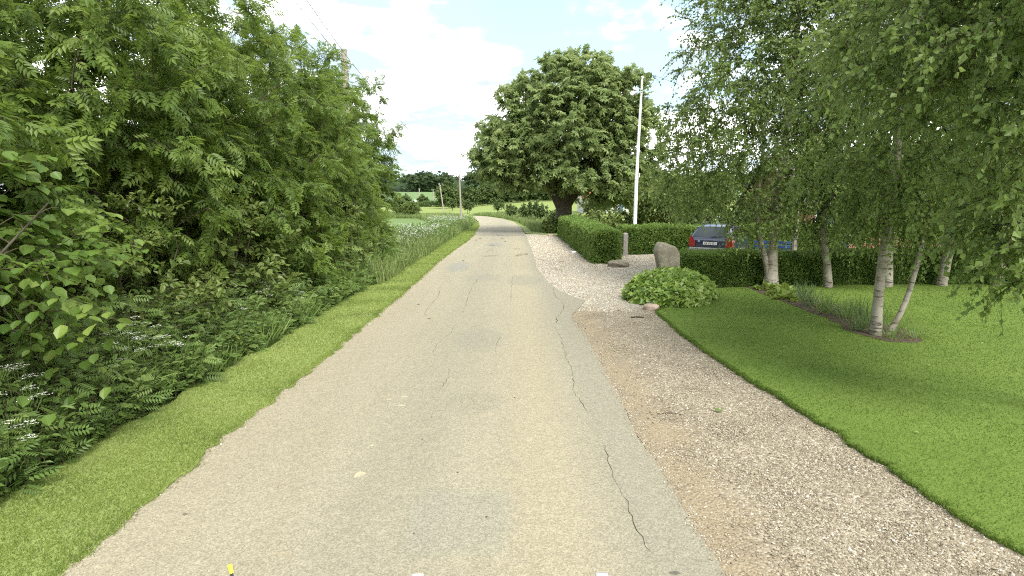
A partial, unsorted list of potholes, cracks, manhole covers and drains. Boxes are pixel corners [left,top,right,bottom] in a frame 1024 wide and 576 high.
crack [553,288,587,411]
crack [604,446,659,562]
